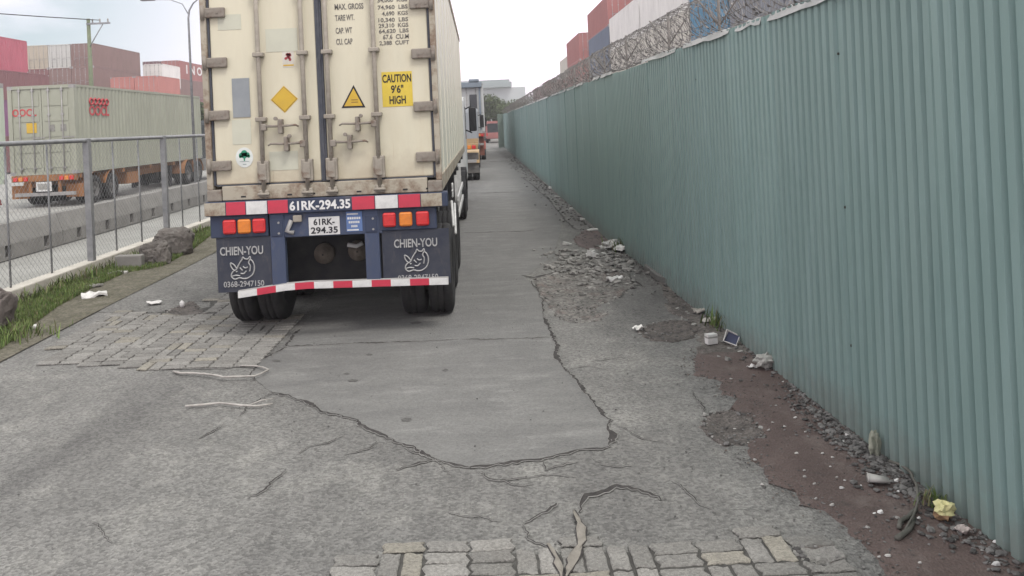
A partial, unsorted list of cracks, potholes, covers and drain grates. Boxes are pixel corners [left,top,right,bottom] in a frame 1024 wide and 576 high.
pothole [552,307,609,323]
crack [92,522,112,542]
pothole [699,410,764,447]
pothole [638,319,701,343]
crack [199,269,712,576]
pothole [573,227,610,250]
pothole [533,266,633,316]
